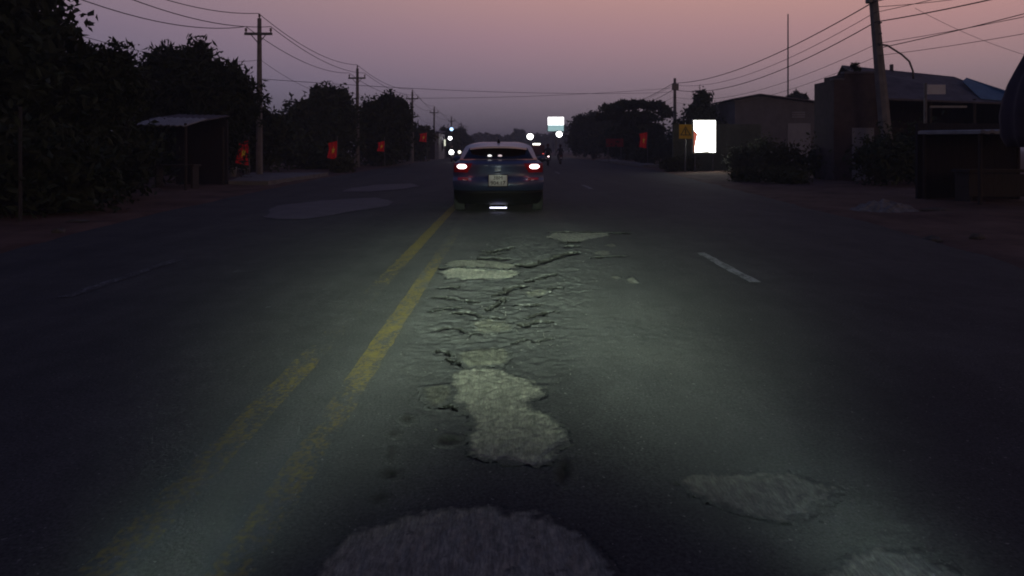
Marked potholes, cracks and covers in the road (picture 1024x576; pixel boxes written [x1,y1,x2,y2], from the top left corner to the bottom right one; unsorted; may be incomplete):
crack [425,231,635,369]
pothole [383,428,404,440]
pothole [395,413,421,427]
pothole [417,384,457,409]
pothole [448,366,574,468]
pothole [431,432,468,449]
